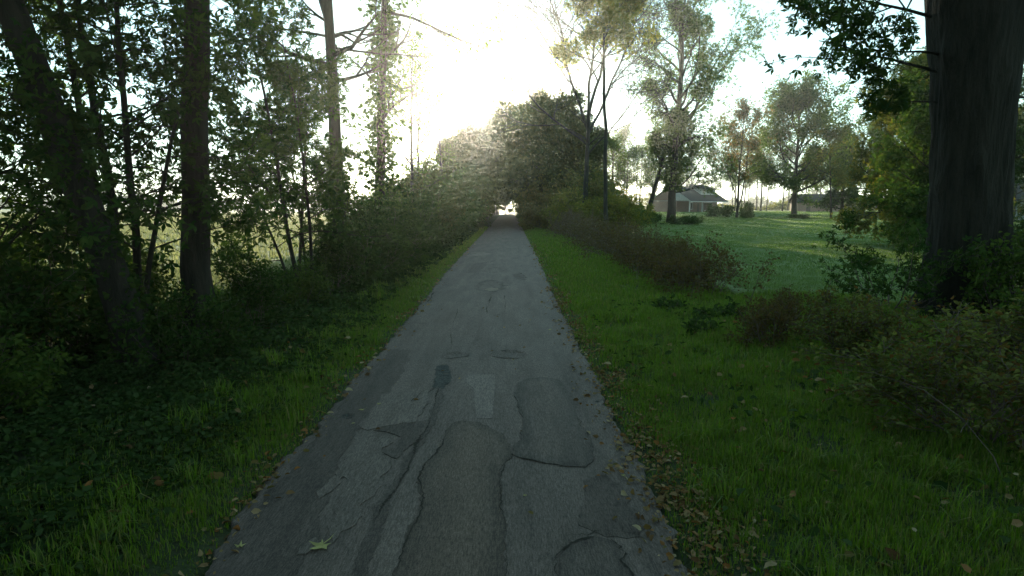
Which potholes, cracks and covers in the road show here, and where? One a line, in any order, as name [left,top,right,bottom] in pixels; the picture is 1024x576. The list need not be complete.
crack [370,382,462,573]
